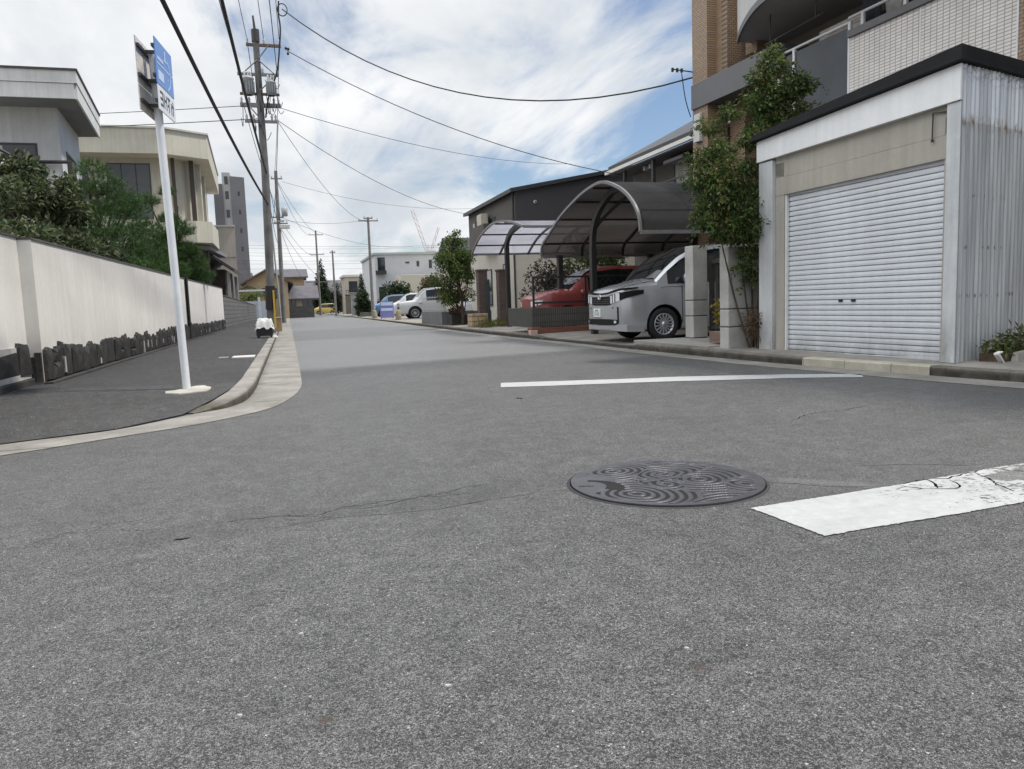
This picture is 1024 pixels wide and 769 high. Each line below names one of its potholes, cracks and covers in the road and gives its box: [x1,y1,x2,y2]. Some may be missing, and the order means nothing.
crack [872,464,1007,489]
manhole cover [567,461,770,509]
crack [14,481,554,548]
